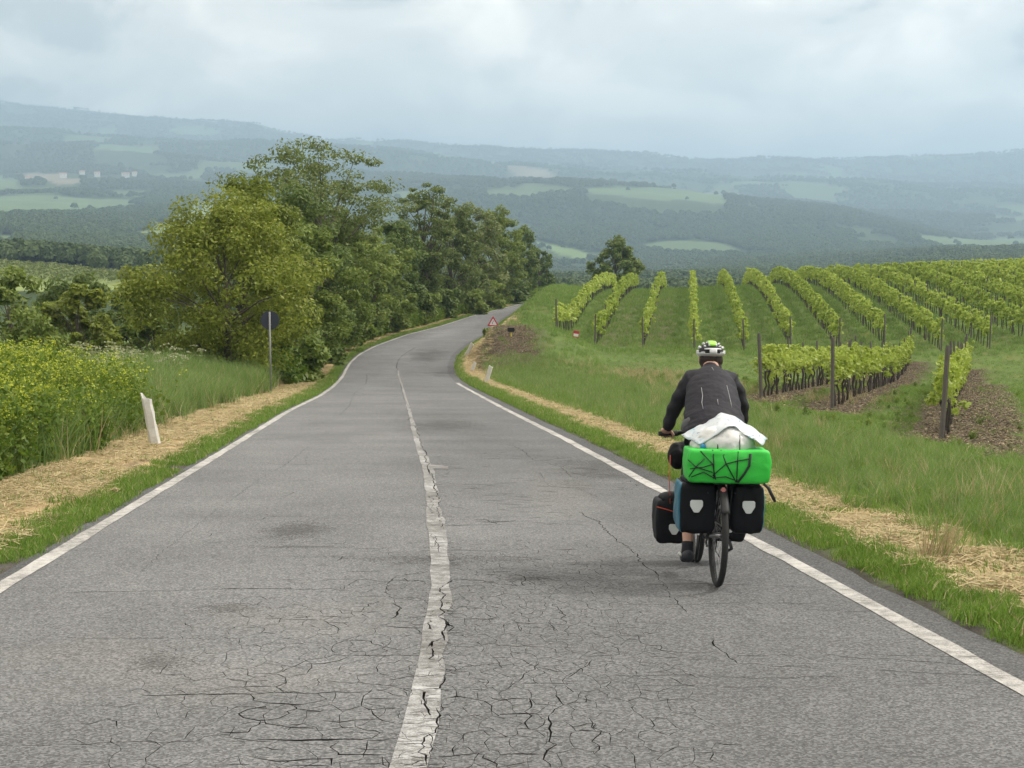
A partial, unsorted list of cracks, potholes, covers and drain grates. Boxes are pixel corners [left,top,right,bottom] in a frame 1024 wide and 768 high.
crack [1,369,856,768]
crack [602,640,1017,690]
